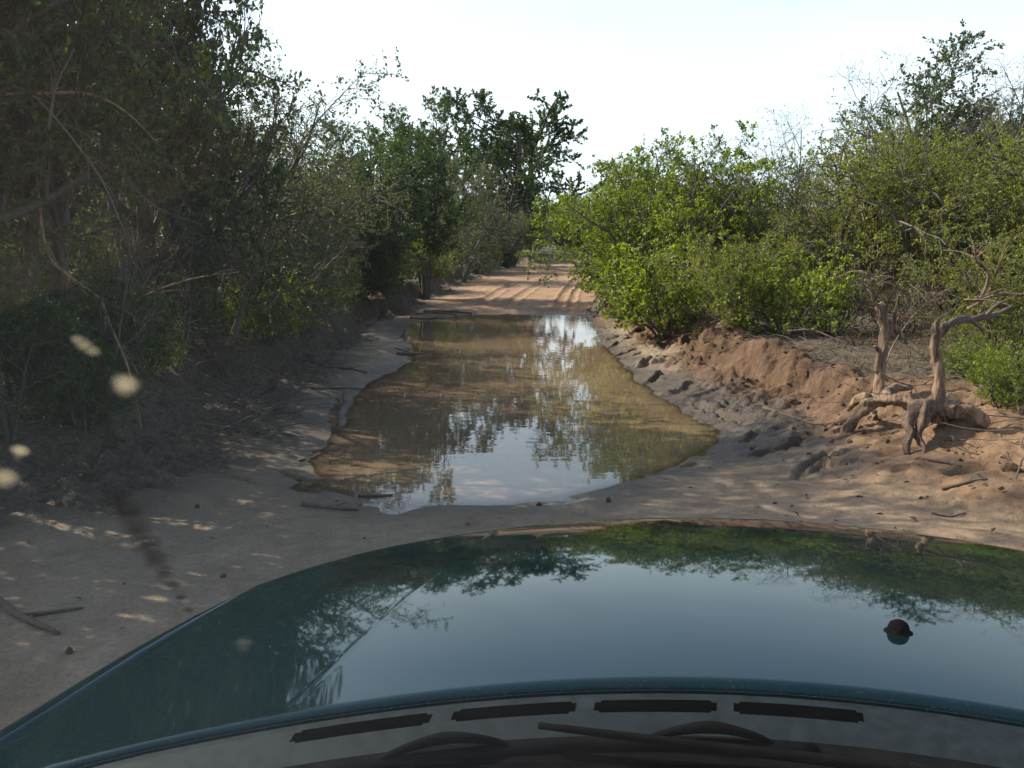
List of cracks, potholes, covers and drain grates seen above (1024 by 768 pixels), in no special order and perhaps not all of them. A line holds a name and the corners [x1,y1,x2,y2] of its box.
pothole [295,310,737,511]
